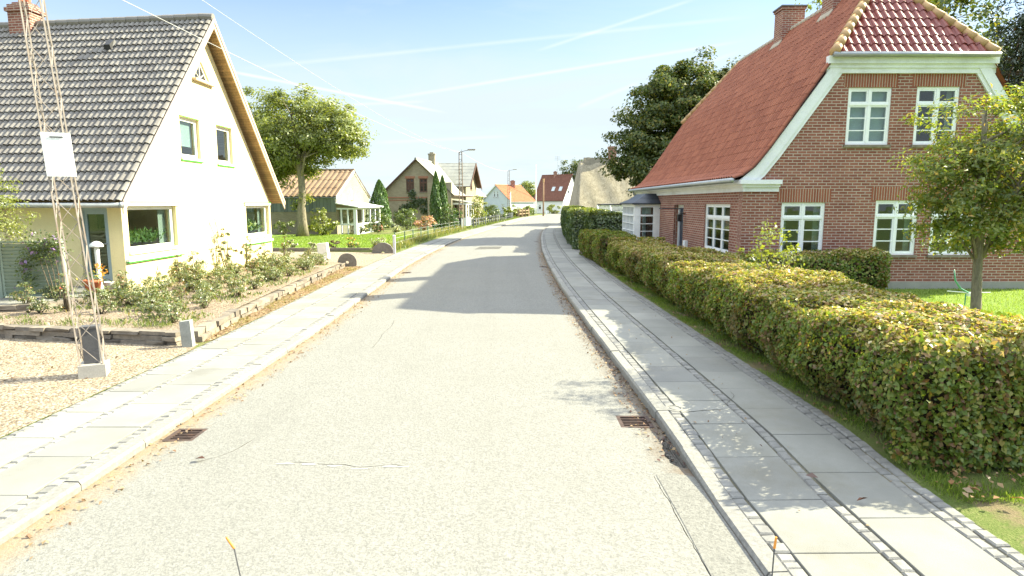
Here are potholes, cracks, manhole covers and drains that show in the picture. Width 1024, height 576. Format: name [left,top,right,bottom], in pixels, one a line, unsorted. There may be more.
drain grate [162,429,207,442]
drain grate [616,416,654,428]
